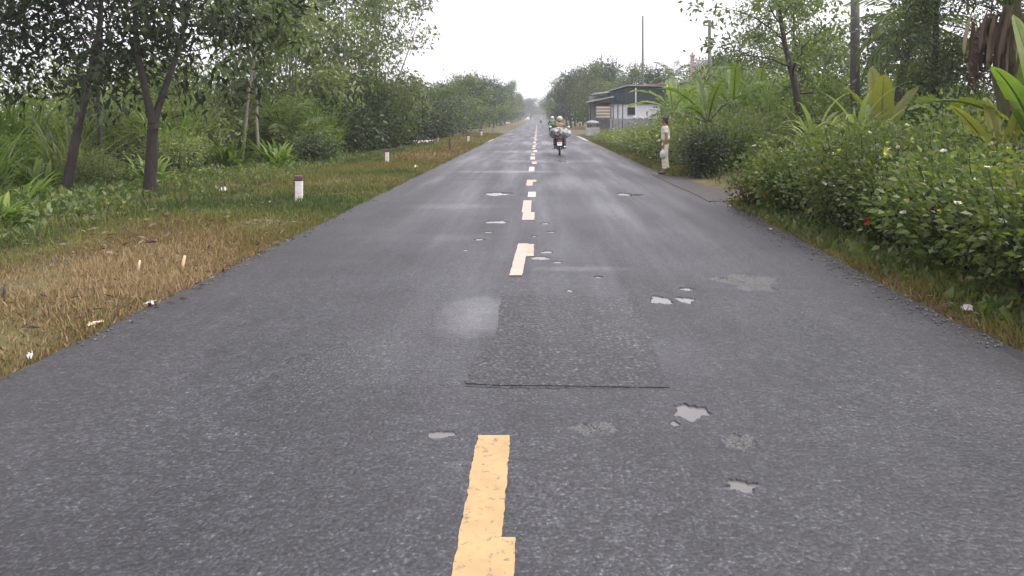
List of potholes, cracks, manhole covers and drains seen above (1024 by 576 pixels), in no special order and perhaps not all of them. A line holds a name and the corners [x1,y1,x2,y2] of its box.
pothole [649,295,674,304]
pothole [720,432,759,452]
pothole [722,478,758,493]
pothole [674,296,696,304]
pothole [672,402,712,422]
pothole [426,430,457,439]
